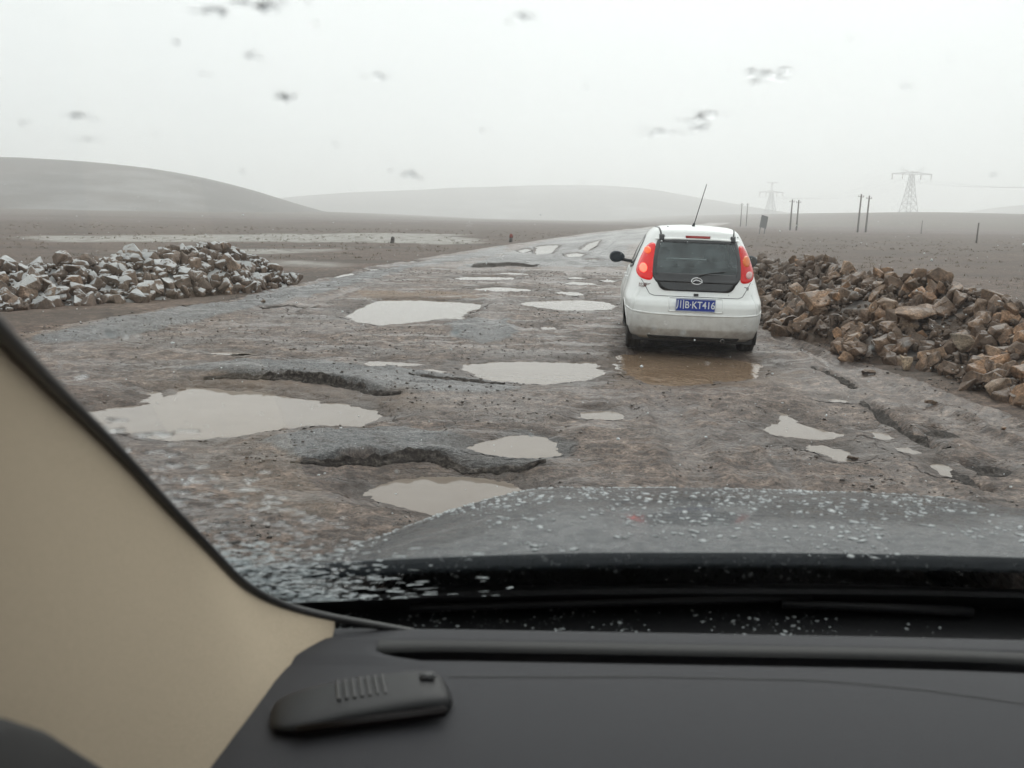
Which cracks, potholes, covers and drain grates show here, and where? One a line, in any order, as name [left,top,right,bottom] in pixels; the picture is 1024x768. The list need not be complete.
pothole [84,382,397,443]
pothole [556,403,644,421]
pothole [779,438,878,463]
pothole [508,298,621,311]
pothole [579,239,602,251]
pothole [336,462,539,519]
pothole [532,244,562,255]
pothole [337,298,488,326]
pothole [606,348,778,387]
pothole [443,427,579,460]
pothole [746,405,861,445]
pothole [448,357,626,385]
